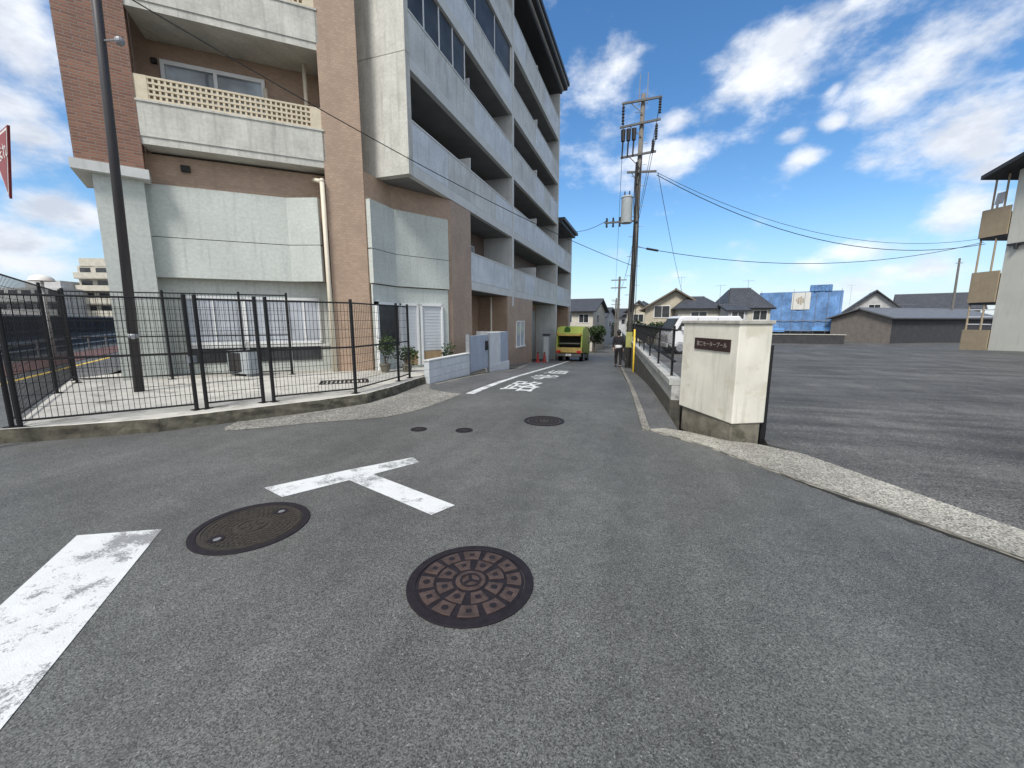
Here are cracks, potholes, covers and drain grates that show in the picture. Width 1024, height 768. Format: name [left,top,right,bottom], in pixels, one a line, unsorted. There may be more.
manhole cover [406,546,533,629]
manhole cover [524,416,564,426]
manhole cover [186,502,310,556]
